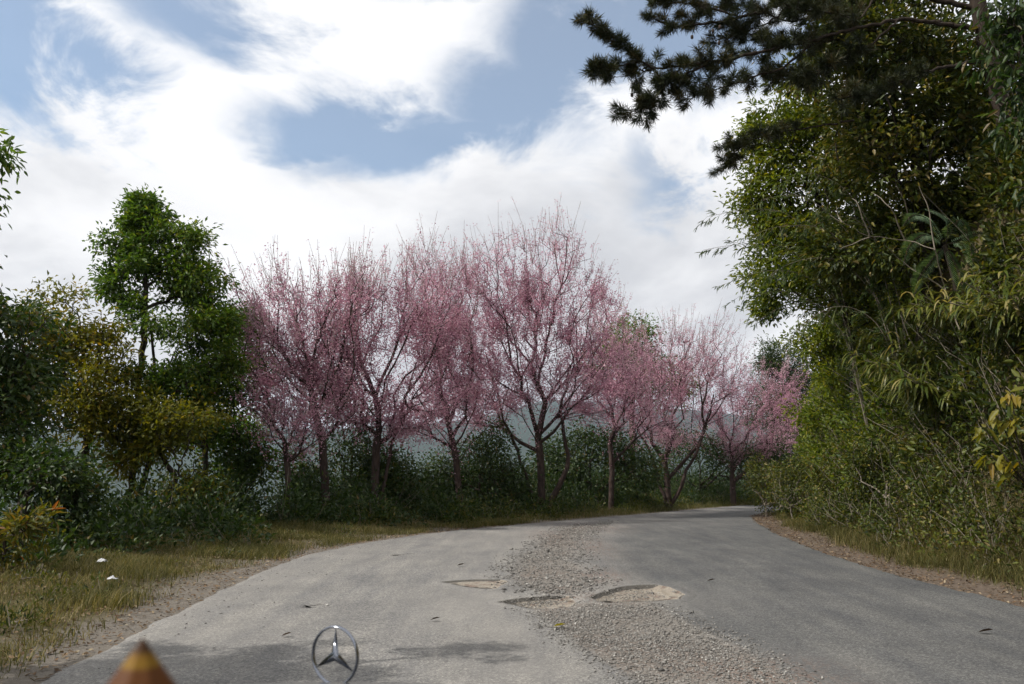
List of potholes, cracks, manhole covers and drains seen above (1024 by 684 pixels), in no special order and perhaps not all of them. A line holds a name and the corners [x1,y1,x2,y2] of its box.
pothole [488,594,599,612]
pothole [432,578,519,591]
pothole [573,583,697,606]
